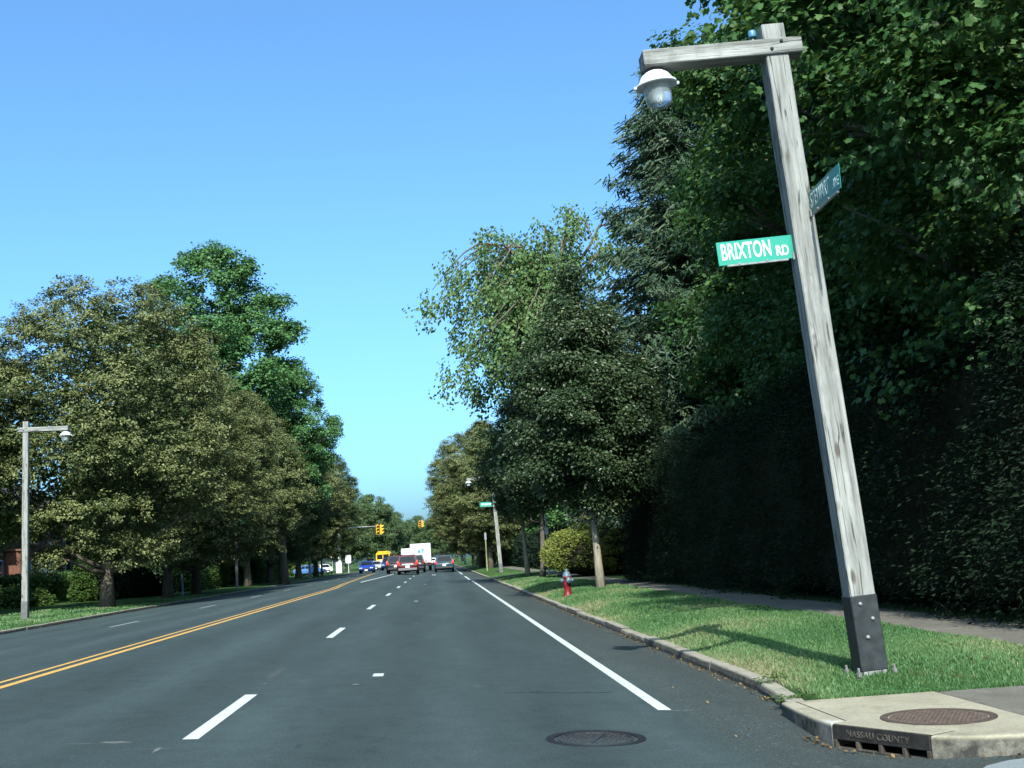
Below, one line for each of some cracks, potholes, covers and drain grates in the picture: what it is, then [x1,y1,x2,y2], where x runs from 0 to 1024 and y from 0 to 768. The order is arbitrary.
manhole cover [880,708,998,726]
drain grate [832,719,955,759]
manhole cover [546,730,646,747]
